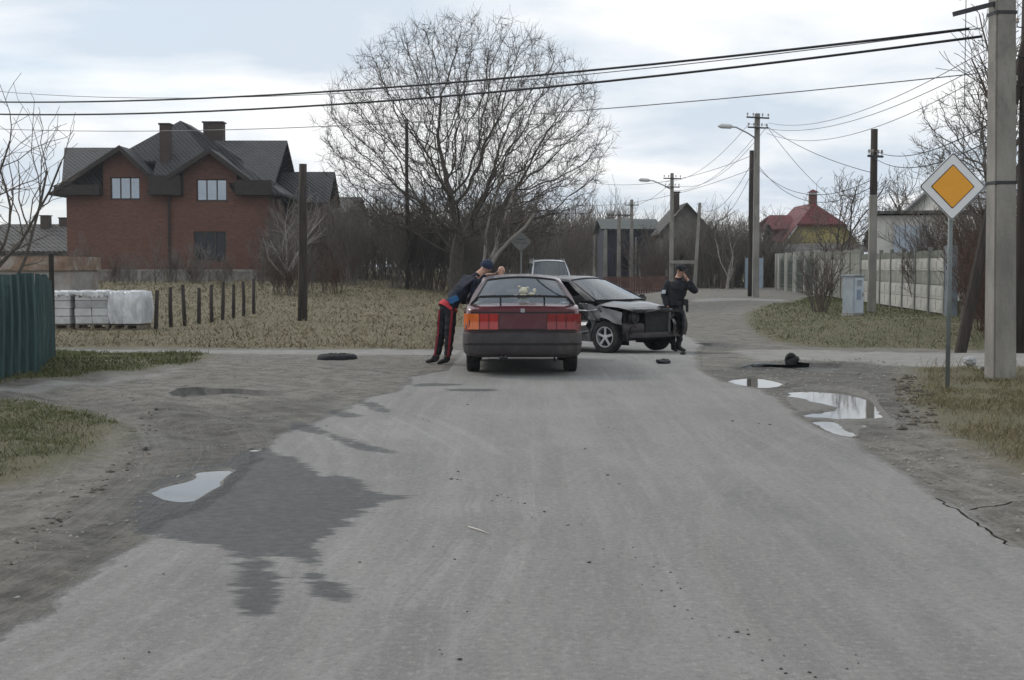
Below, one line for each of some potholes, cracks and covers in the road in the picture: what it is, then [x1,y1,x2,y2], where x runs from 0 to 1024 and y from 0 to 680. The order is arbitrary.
crack [937,498,1019,545]
pothole [725,376,787,388]
pothole [783,385,897,437]
pothole [147,468,236,502]
